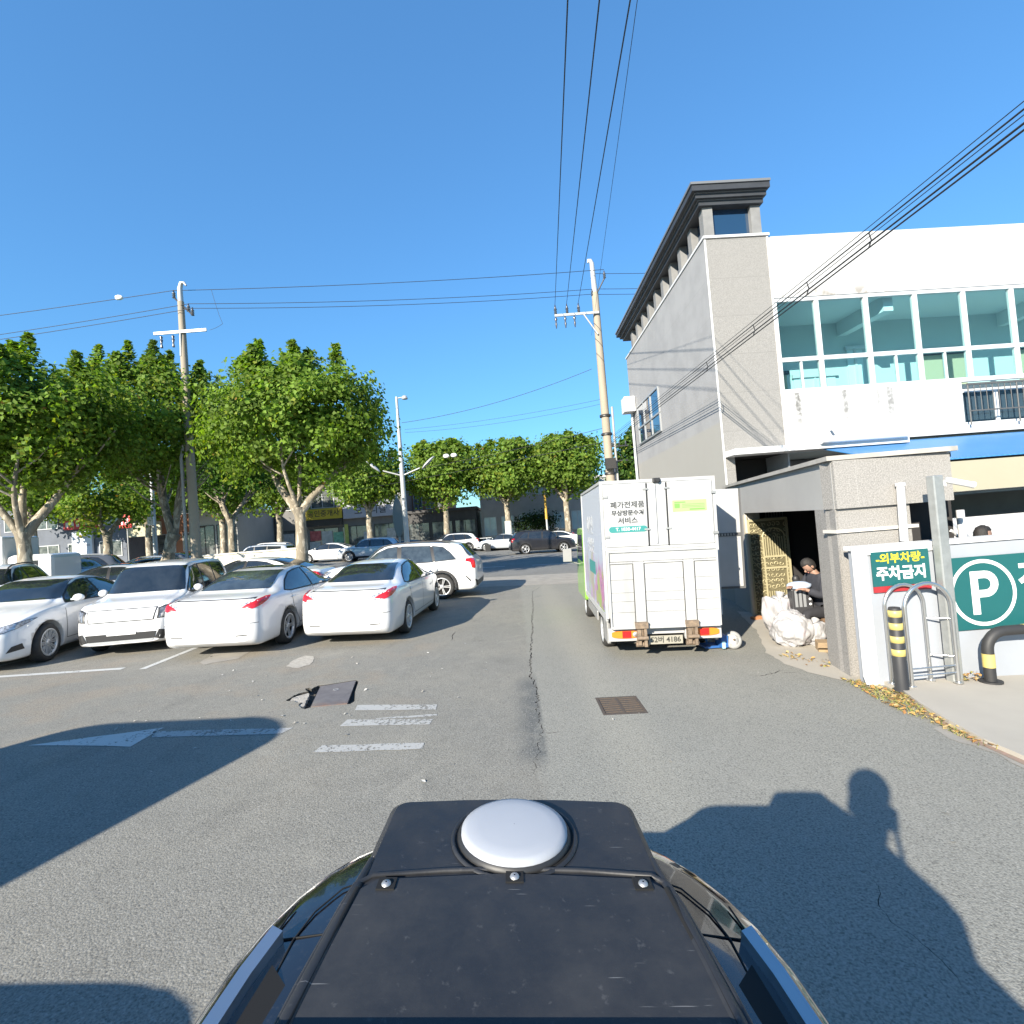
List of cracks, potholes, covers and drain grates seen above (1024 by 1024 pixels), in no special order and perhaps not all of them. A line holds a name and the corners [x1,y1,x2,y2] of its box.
manhole cover [311,681,356,707]
drain grate [595,696,648,715]
crack [857,869,979,1006]
